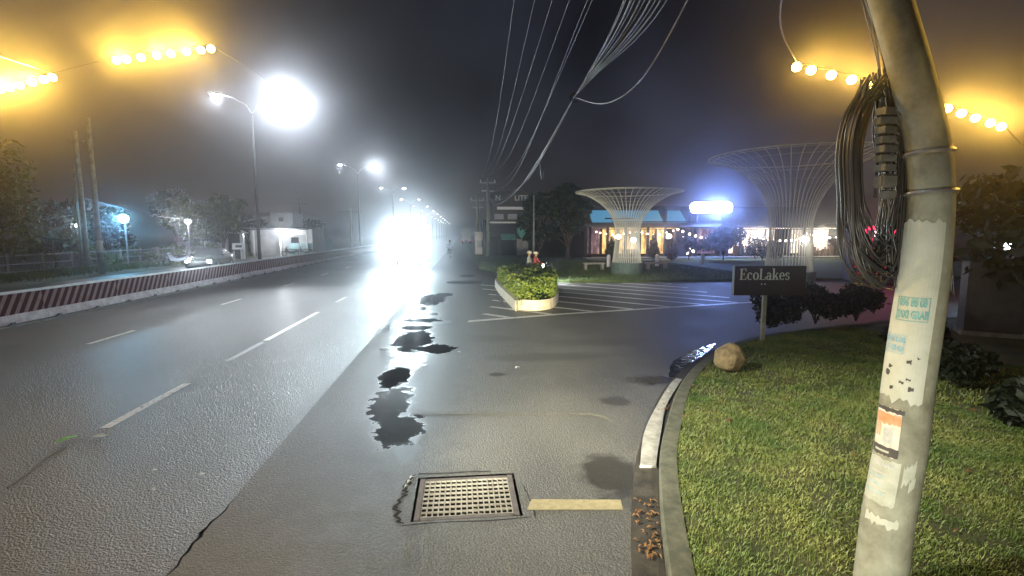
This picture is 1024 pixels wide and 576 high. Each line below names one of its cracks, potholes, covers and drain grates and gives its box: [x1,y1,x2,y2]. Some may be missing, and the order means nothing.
crack [166,497,236,576]
drain grate [412,474,521,522]
crack [391,470,536,576]
